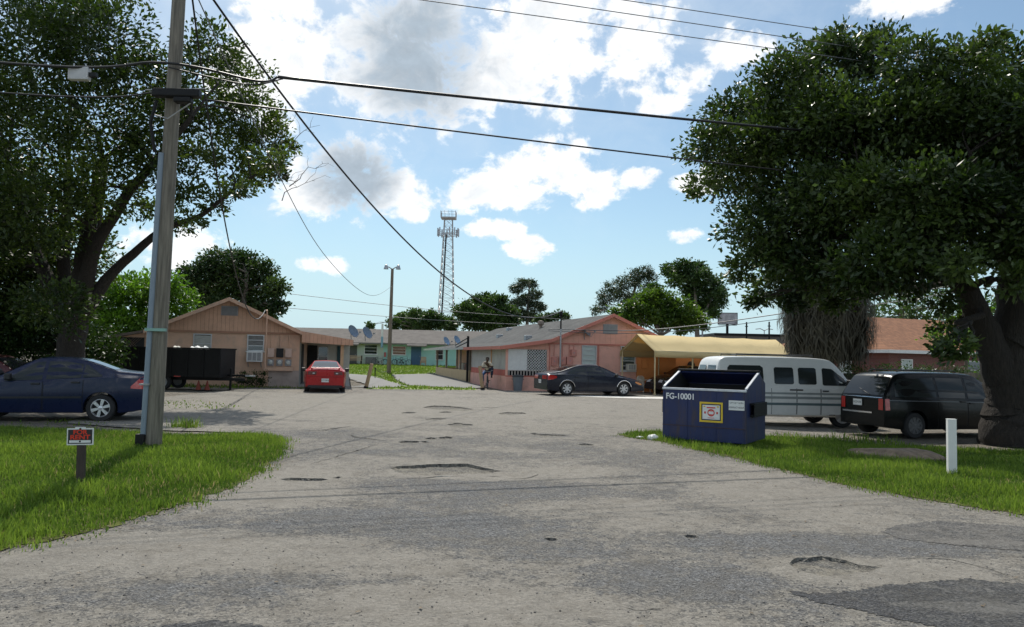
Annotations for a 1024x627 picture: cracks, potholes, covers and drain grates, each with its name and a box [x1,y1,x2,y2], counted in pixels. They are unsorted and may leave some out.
pothole [391,464,500,475]
pothole [789,556,882,577]
crack [309,426,376,440]
